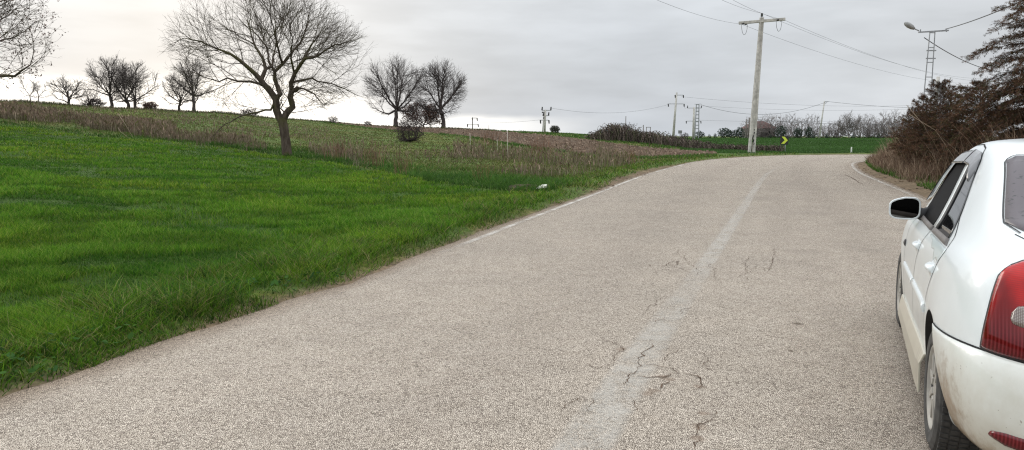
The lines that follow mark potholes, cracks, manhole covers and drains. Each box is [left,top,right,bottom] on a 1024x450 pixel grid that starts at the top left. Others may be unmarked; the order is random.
crack [590,339,711,389]
